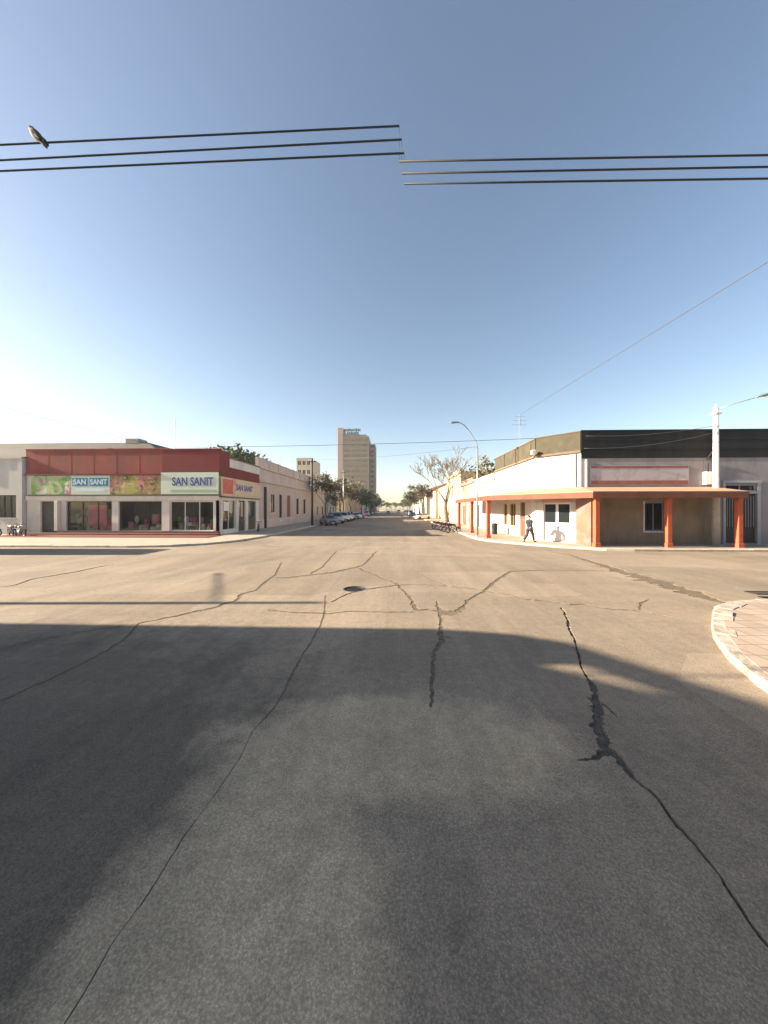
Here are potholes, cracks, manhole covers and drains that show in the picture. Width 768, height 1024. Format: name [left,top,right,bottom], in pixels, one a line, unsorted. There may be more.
crack [4,564,112,587]
crack [268,584,439,614]
crack [560,607,768,947]
